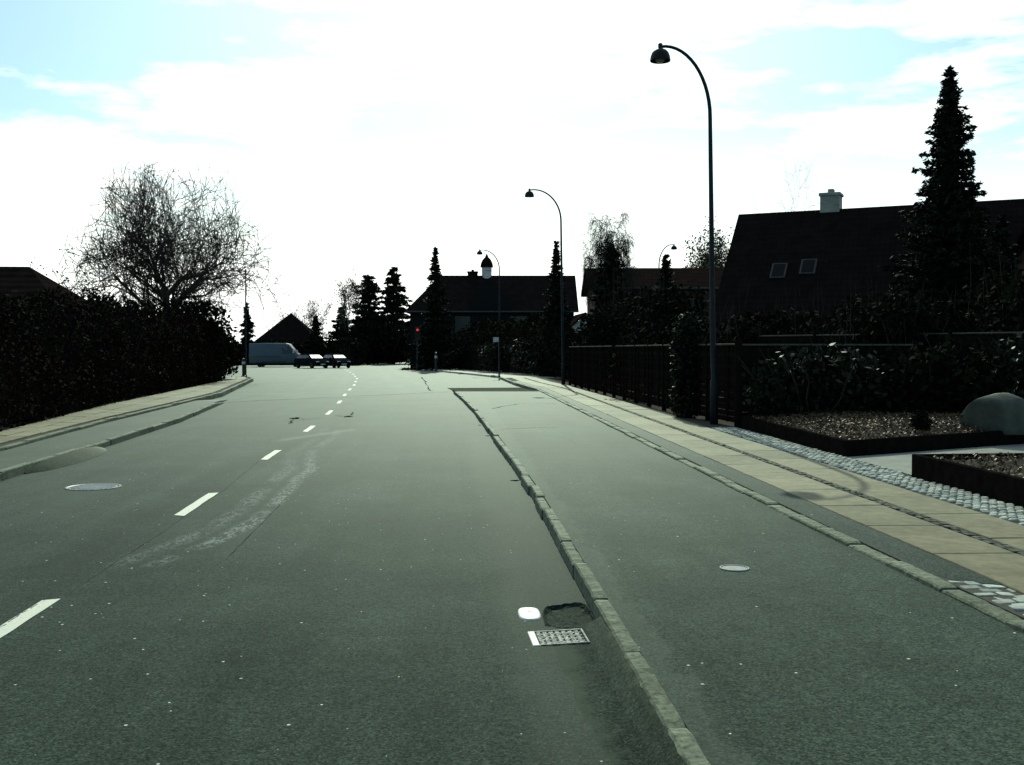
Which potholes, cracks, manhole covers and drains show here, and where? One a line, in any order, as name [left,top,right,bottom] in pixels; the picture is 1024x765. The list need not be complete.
manhole cover [719,564,749,572]
pothole [542,602,595,629]
manhole cover [64,483,122,491]
